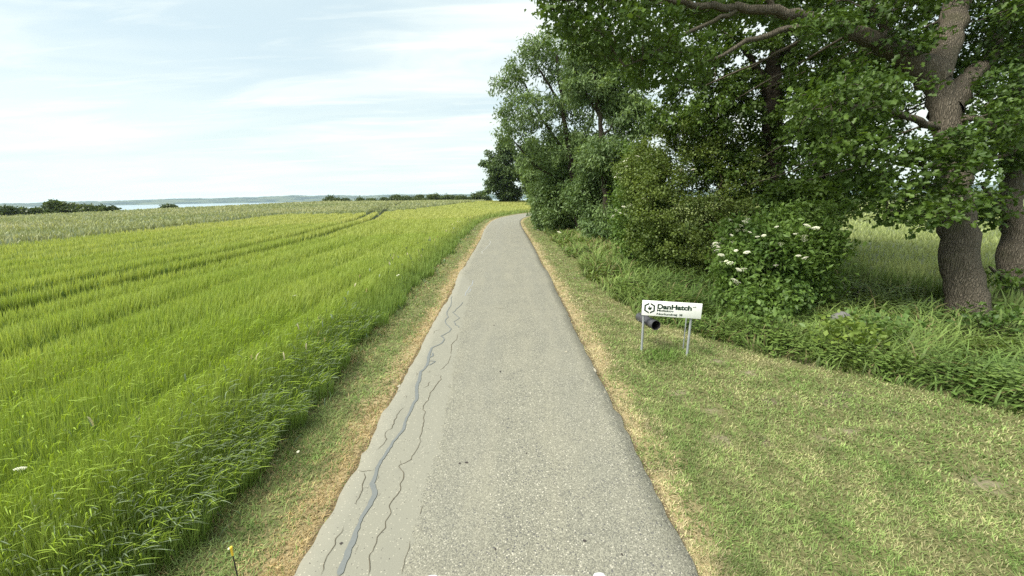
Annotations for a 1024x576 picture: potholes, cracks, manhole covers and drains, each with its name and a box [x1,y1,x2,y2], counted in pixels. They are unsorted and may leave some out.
crack [321,339,457,574]
